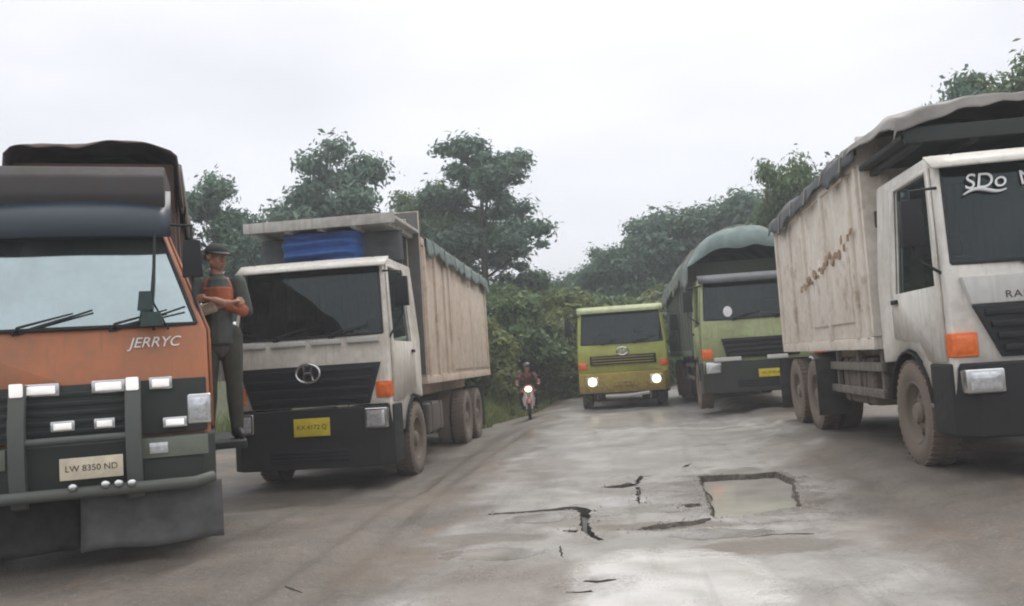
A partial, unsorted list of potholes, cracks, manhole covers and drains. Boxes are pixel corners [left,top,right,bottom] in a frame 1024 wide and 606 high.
pothole [691,469,814,518]
crack [568,579,617,593]
crack [480,475,657,557]
